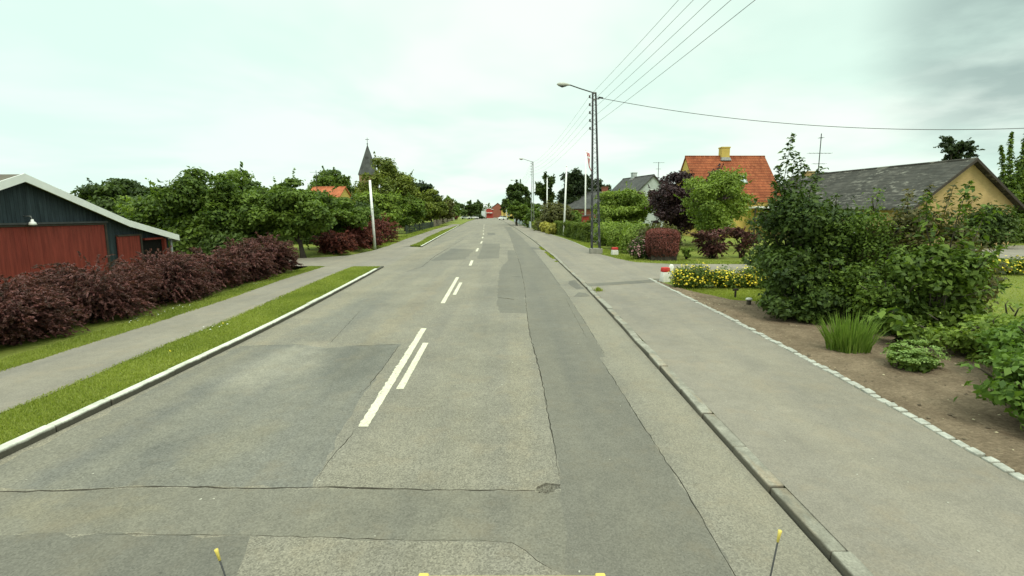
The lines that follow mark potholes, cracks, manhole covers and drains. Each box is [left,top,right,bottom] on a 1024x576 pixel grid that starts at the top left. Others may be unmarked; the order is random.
crack [0,433,535,493]
crack [498,237,559,470]
crack [599,357,736,576]
pothole [536,483,560,494]
